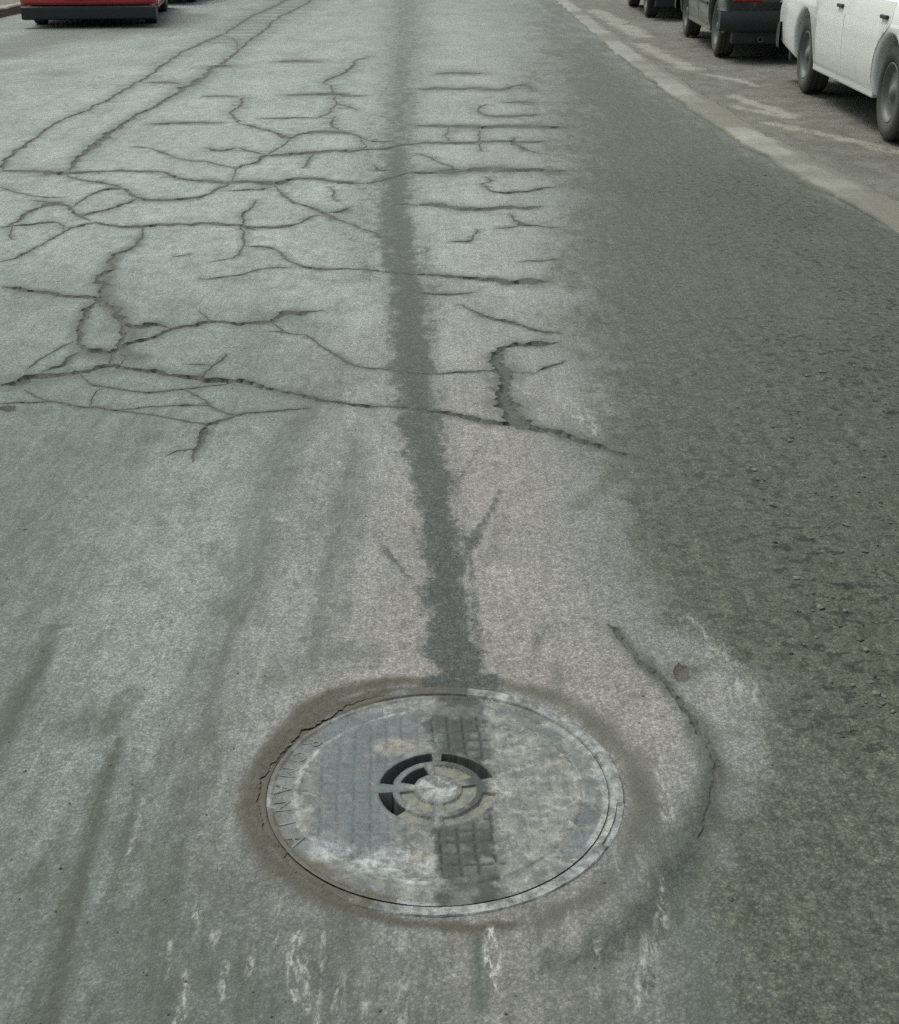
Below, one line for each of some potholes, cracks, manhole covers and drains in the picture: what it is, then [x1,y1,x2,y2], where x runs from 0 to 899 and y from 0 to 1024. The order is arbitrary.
crack [607,624,721,840]
crack [0,0,646,463]
manhole cover [256,687,624,918]
